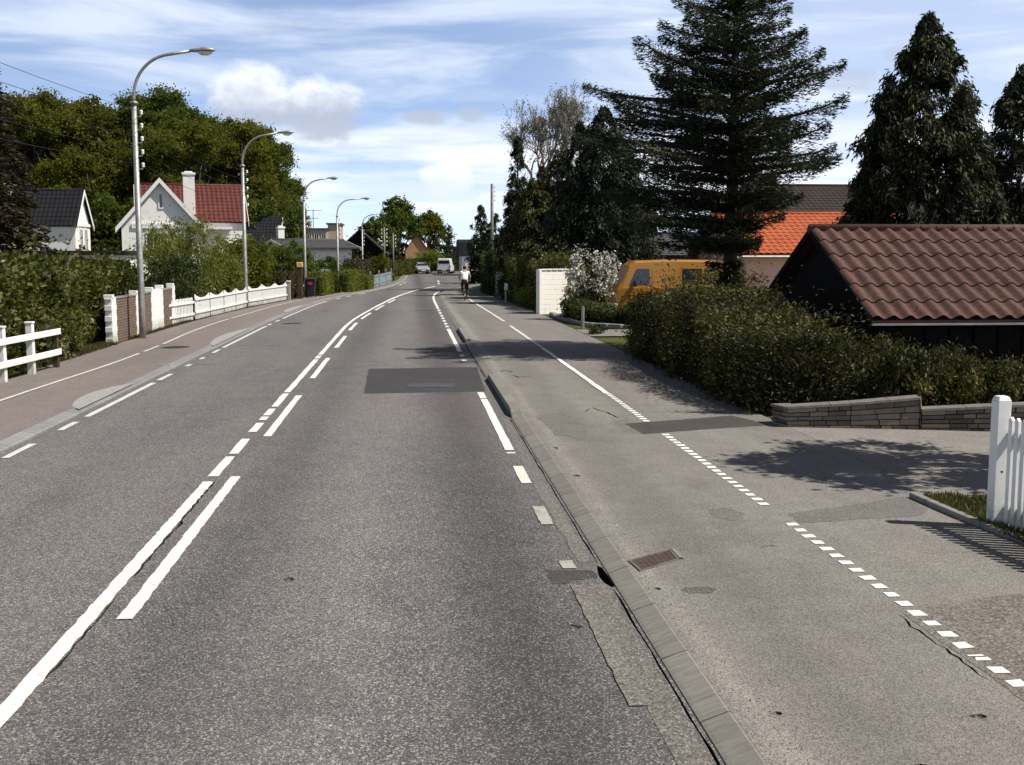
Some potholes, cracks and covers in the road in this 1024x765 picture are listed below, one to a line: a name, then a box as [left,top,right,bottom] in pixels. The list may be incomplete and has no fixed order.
crack [900,615,989,680]
pothole [597,566,615,587]
